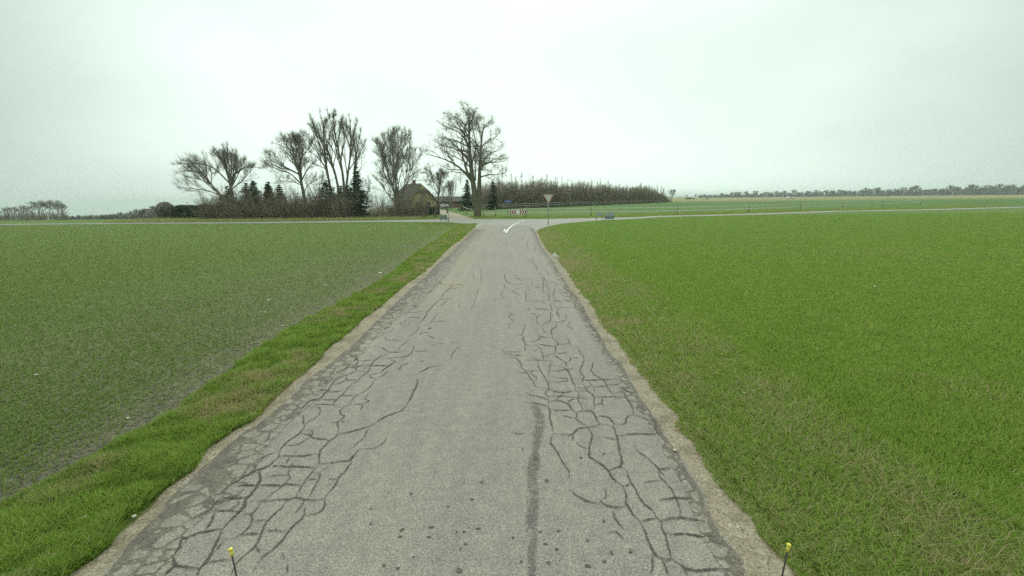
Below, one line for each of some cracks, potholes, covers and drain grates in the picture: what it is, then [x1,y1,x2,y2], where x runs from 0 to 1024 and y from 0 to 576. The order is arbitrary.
crack [166,242,729,574]
